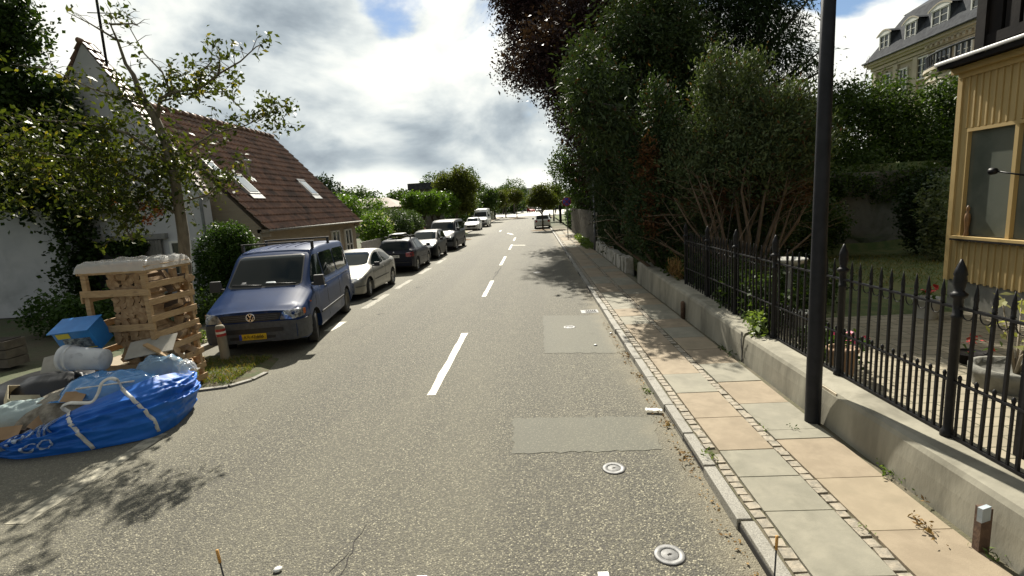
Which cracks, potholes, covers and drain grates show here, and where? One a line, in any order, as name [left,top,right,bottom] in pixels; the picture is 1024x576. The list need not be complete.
manhole cover [653,544,686,566]
crack [328,522,368,575]
manhole cover [602,462,626,474]
